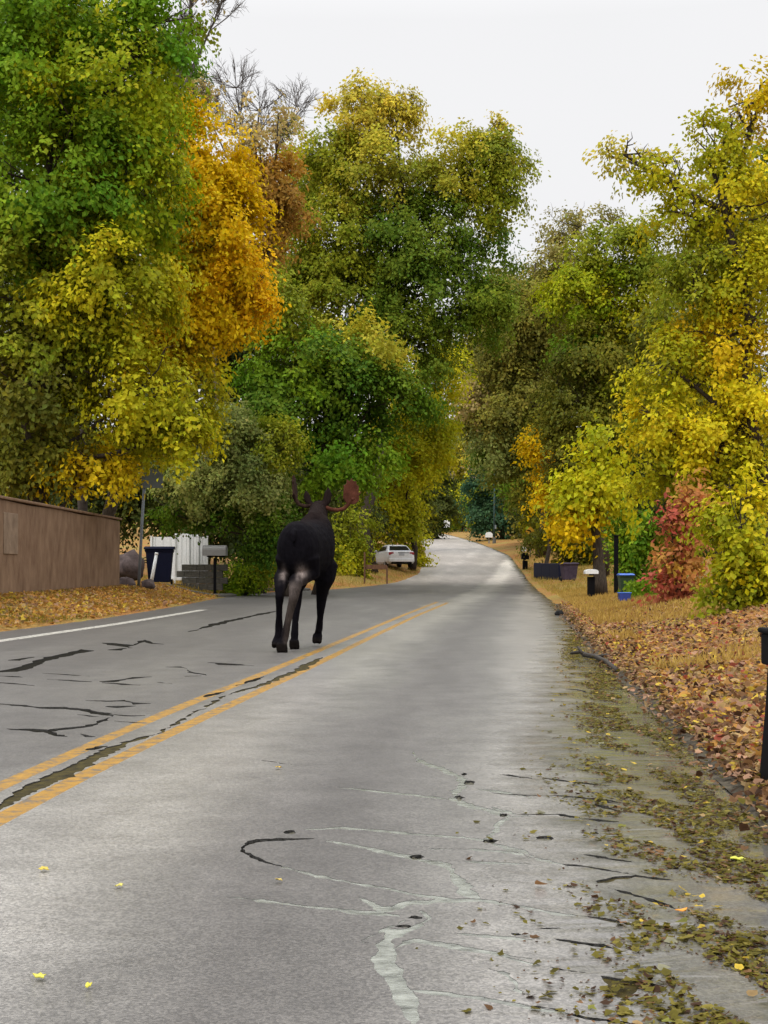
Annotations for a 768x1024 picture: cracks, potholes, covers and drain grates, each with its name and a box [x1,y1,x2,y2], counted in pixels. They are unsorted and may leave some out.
crack [231,752,675,1024]
crack [0,662,252,737]
